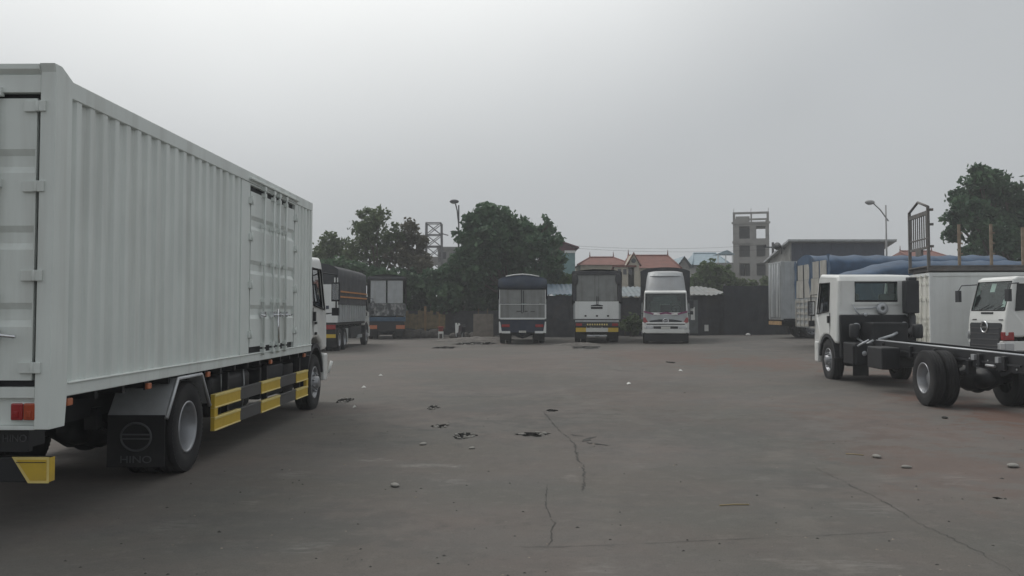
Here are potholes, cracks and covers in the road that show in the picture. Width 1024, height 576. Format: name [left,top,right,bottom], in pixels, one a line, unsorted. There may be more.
crack [816,468,1016,573]
crack [545,487,556,546]
crack [544,413,612,490]
pothole [452,432,478,440]
